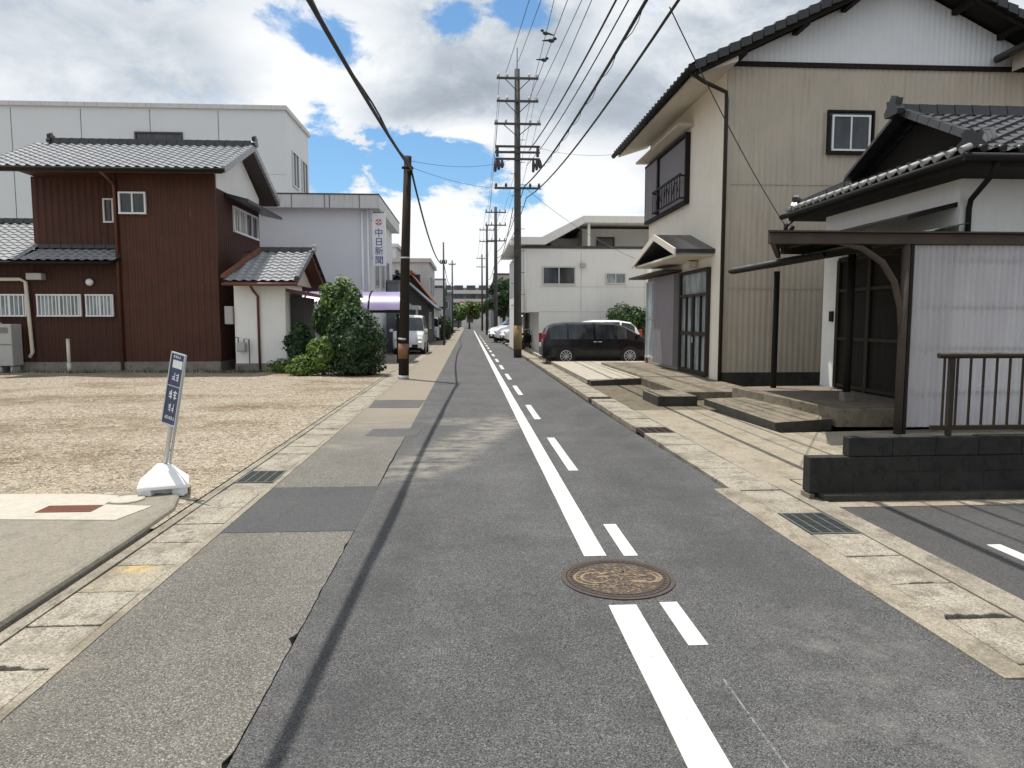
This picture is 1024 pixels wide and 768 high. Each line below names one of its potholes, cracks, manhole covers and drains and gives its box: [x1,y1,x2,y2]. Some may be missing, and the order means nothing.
drain grate [636,427,675,436]
manhole cover [562,558,676,600]
drain grate [234,470,287,483]
drain grate [779,512,860,535]
